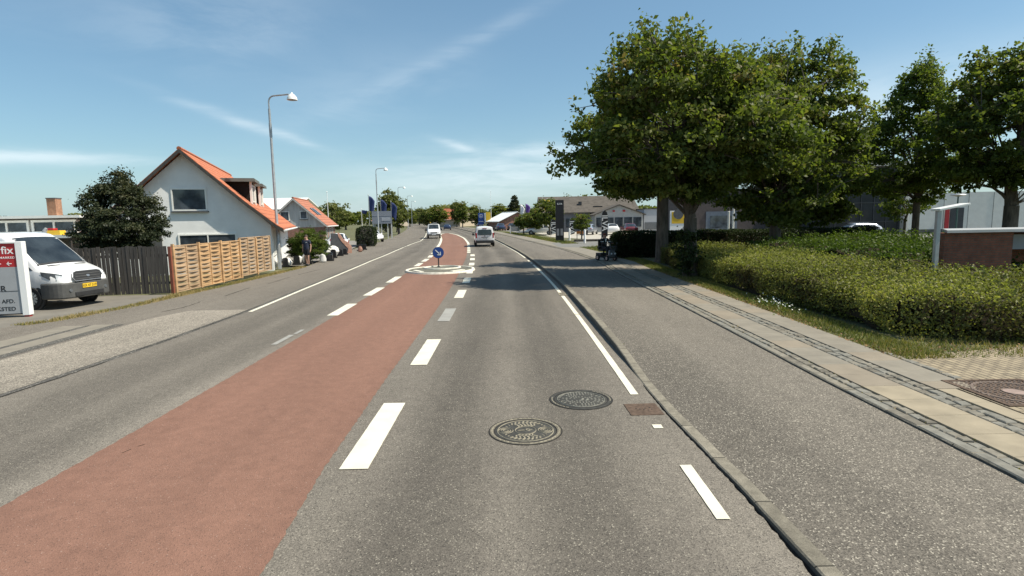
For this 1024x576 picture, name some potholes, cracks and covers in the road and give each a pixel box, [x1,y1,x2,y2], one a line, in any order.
manhole cover [549,390,613,410]
manhole cover [941,379,1024,408]
manhole cover [489,418,563,445]
